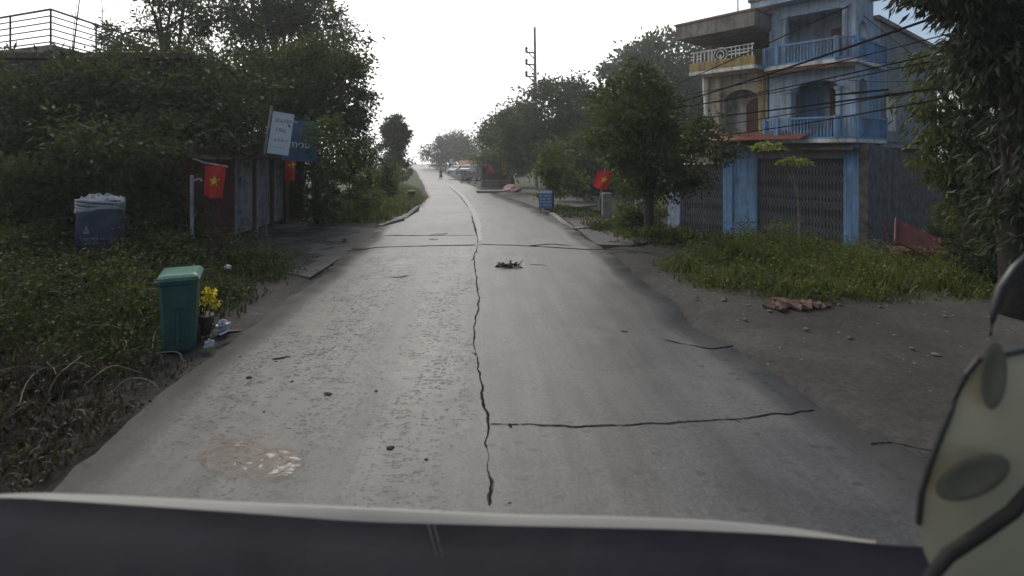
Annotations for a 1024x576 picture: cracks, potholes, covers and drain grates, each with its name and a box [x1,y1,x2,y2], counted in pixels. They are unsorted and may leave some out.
crack [471,244,815,505]
crack [870,441,931,452]
